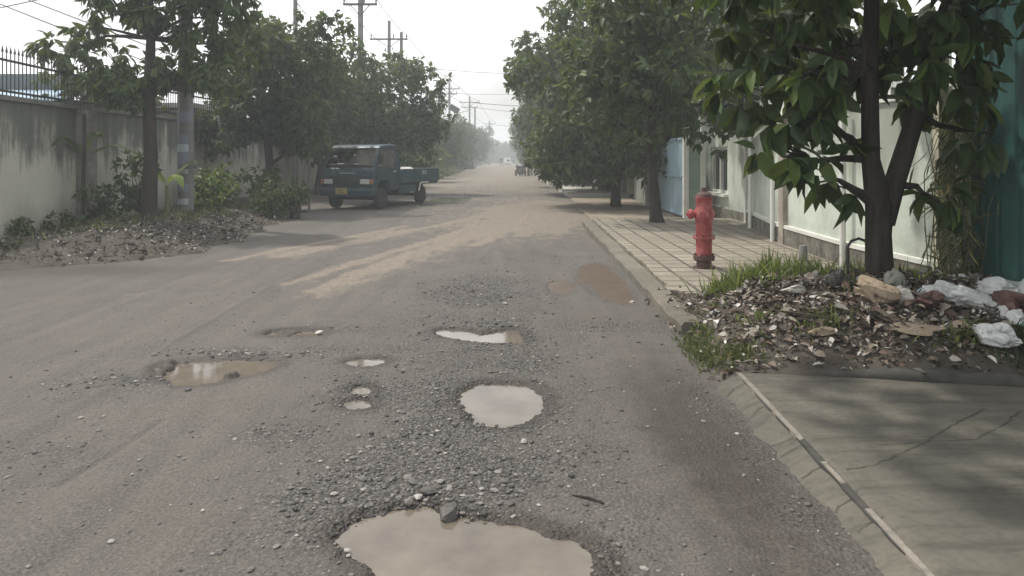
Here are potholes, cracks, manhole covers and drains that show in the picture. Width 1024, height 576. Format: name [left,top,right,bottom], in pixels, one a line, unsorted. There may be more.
pothole [253,326,334,339]
pothole [569,261,646,307]
pothole [333,396,381,411]
pothole [445,377,558,431]
pothole [426,325,533,346]
pothole [320,495,620,576]
pothole [342,382,379,396]
pothole [140,354,293,389]
pothole [541,279,582,297]
pothole [335,355,394,368]
